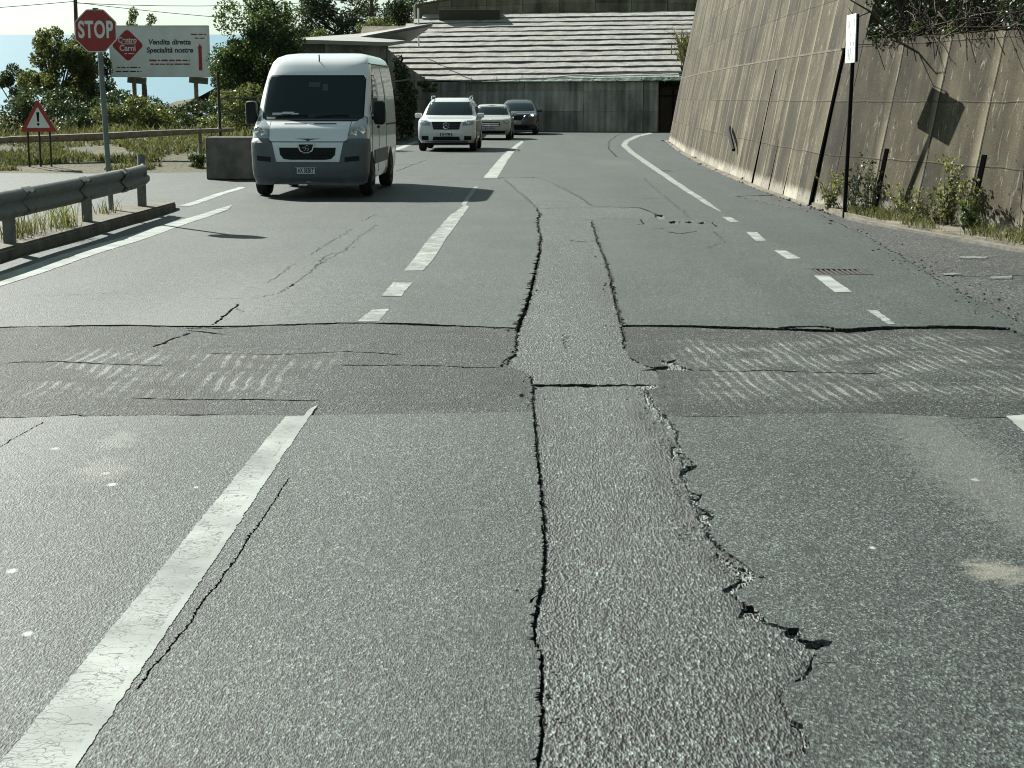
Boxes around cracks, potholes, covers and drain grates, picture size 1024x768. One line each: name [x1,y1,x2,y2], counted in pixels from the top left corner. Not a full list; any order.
crack [136,477,290,689]
crack [153,304,244,347]
crack [209,160,861,768]
